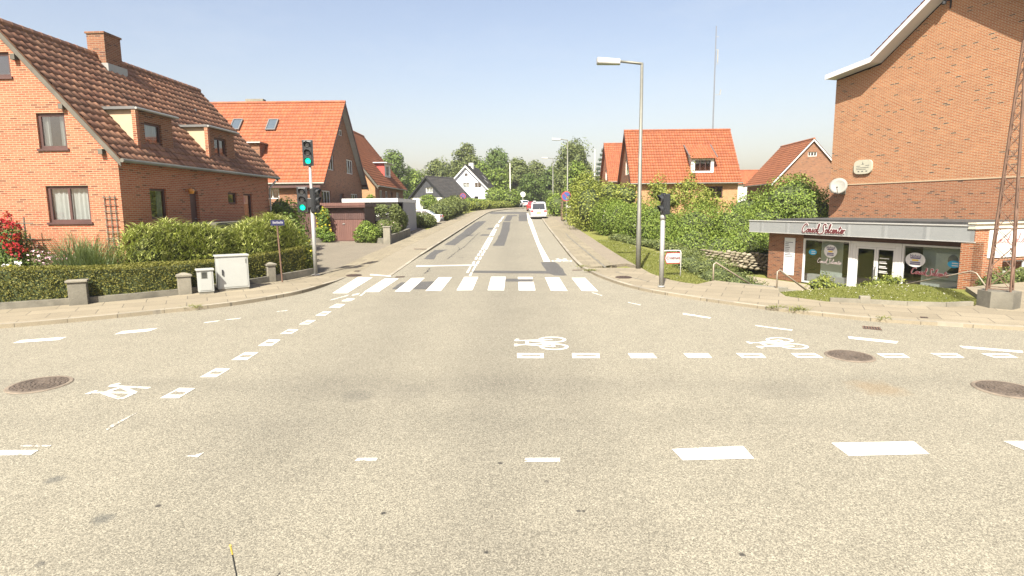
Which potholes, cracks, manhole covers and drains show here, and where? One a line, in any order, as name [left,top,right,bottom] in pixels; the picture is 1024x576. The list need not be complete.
manhole cover [3,376,74,394]
manhole cover [970,380,1024,399]
manhole cover [824,350,876,363]
